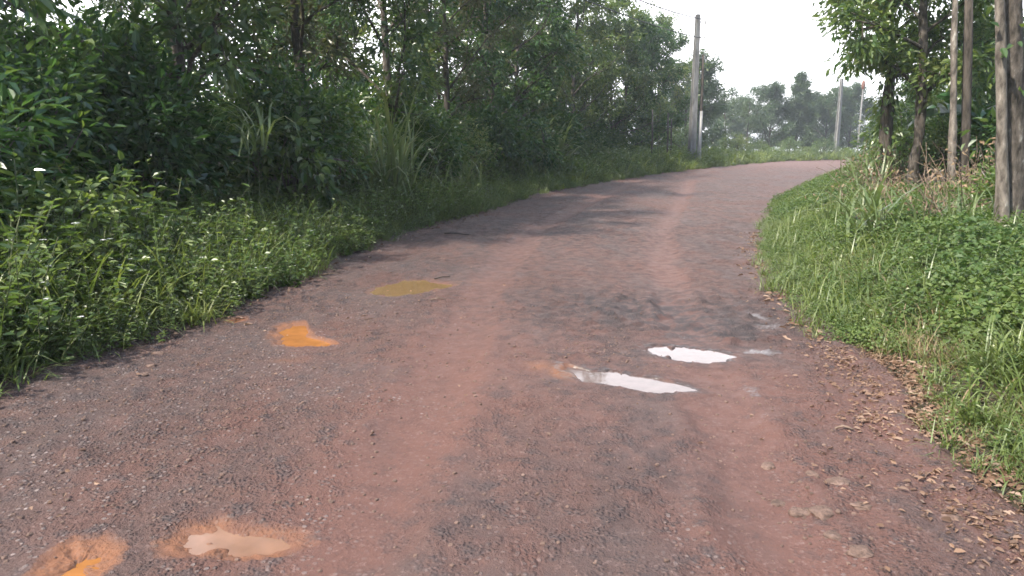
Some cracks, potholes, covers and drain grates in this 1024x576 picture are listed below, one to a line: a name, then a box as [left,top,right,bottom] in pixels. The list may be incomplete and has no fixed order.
pothole [0,517,170,576]
pothole [619,340,758,370]
pothole [108,501,353,576]
pothole [536,359,718,400]
pothole [251,317,350,352]
pothole [350,275,472,300]
